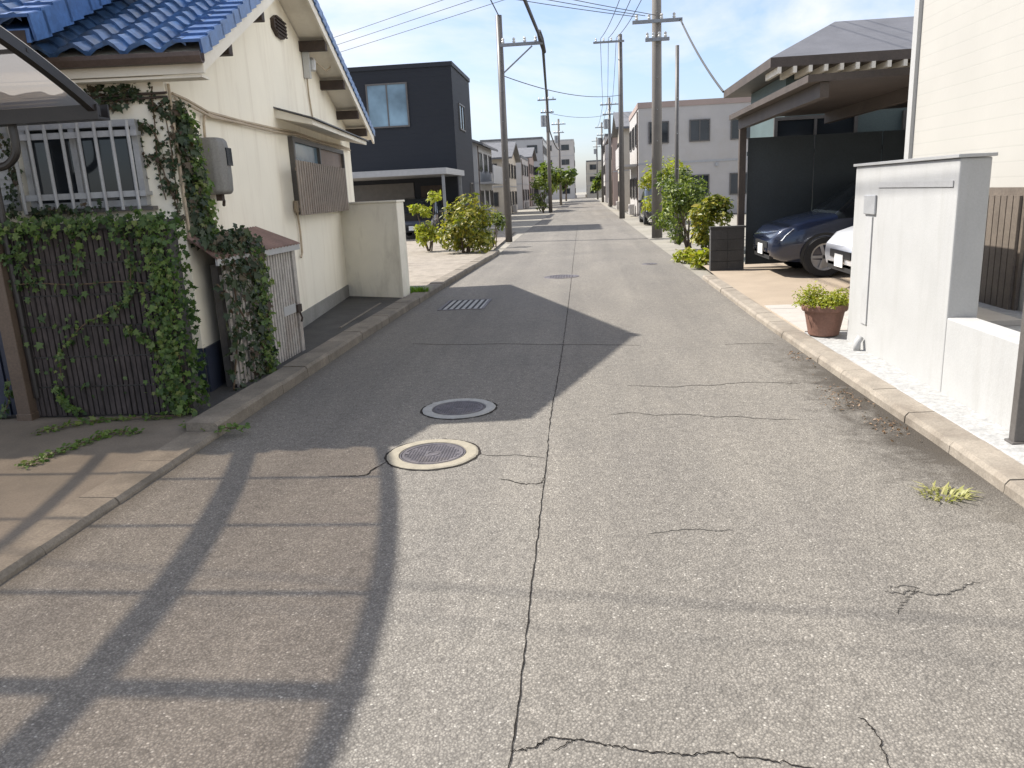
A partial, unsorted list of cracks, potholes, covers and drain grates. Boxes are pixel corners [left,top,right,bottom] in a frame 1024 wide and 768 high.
manhole cover [420,398,497,419]
crack [440,233,812,768]
manhole cover [384,439,481,471]
drain grate [437,299,492,311]
crack [858,717,890,767]
crack [885,581,980,611]
